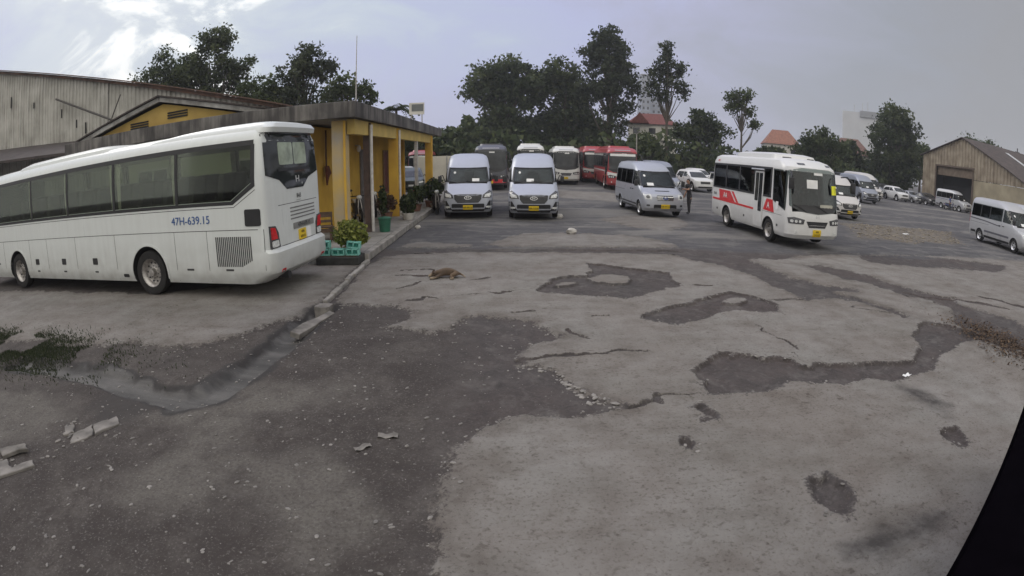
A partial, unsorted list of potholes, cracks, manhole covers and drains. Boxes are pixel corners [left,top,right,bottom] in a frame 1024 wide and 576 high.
crack [749,322,812,365]
pothole [934,425,976,451]
crack [603,391,712,415]
pothole [673,432,702,453]
crack [383,267,655,367]
pothole [799,467,863,526]
pothole [684,401,730,426]
